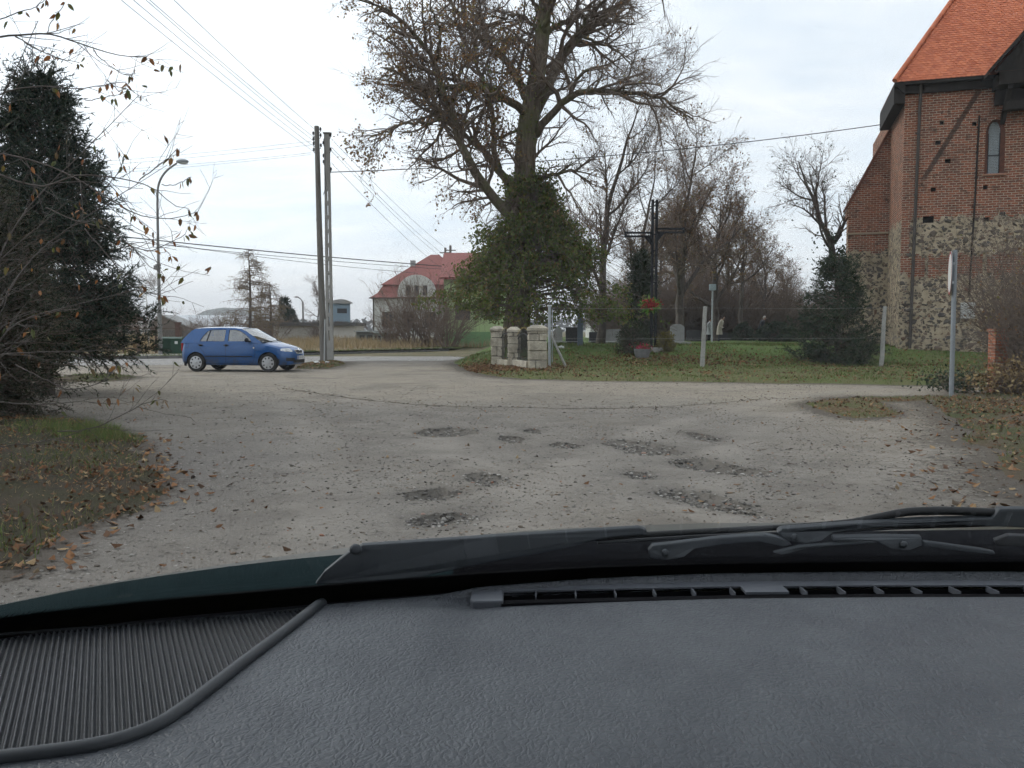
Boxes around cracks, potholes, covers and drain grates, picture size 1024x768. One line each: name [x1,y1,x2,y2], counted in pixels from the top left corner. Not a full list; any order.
pothole [462,472,509,487]
pothole [618,470,656,480]
pothole [412,426,480,437]
pothole [596,438,685,455]
pothole [668,456,782,477]
pothole [648,488,773,518]
pothole [404,512,479,528]
pothole [685,431,721,442]
pothole [398,486,467,501]
pothole [549,441,585,449]
pothole [497,435,526,443]
